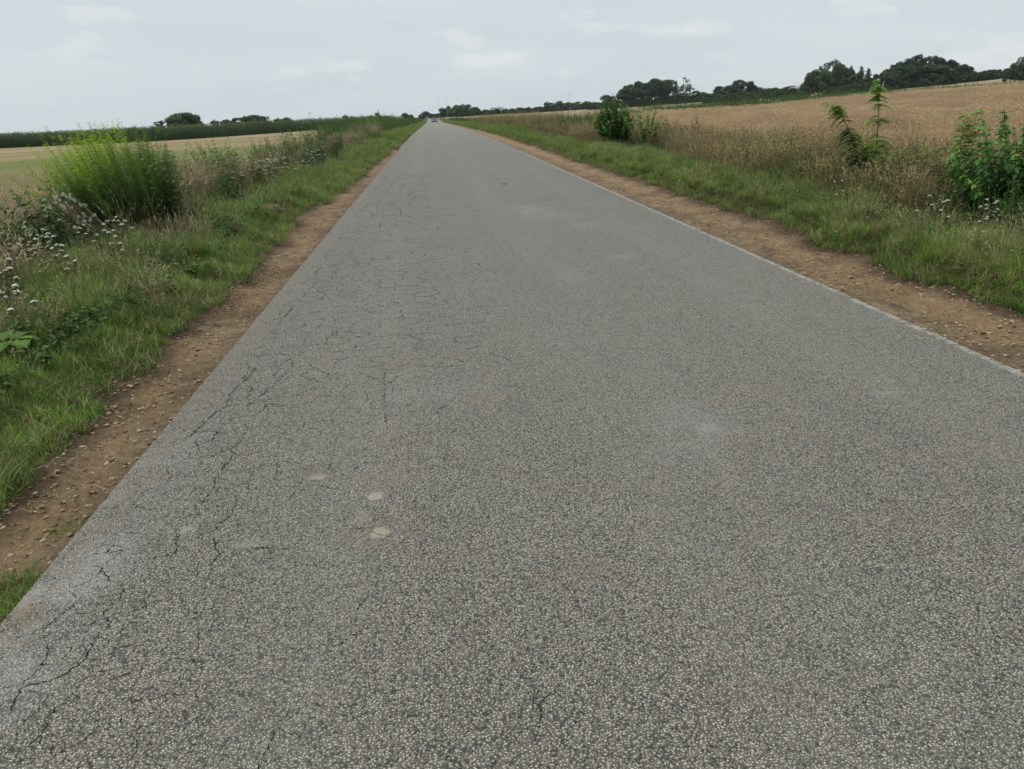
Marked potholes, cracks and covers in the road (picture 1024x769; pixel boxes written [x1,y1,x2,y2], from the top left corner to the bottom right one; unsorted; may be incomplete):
crack [0,174,576,769]
